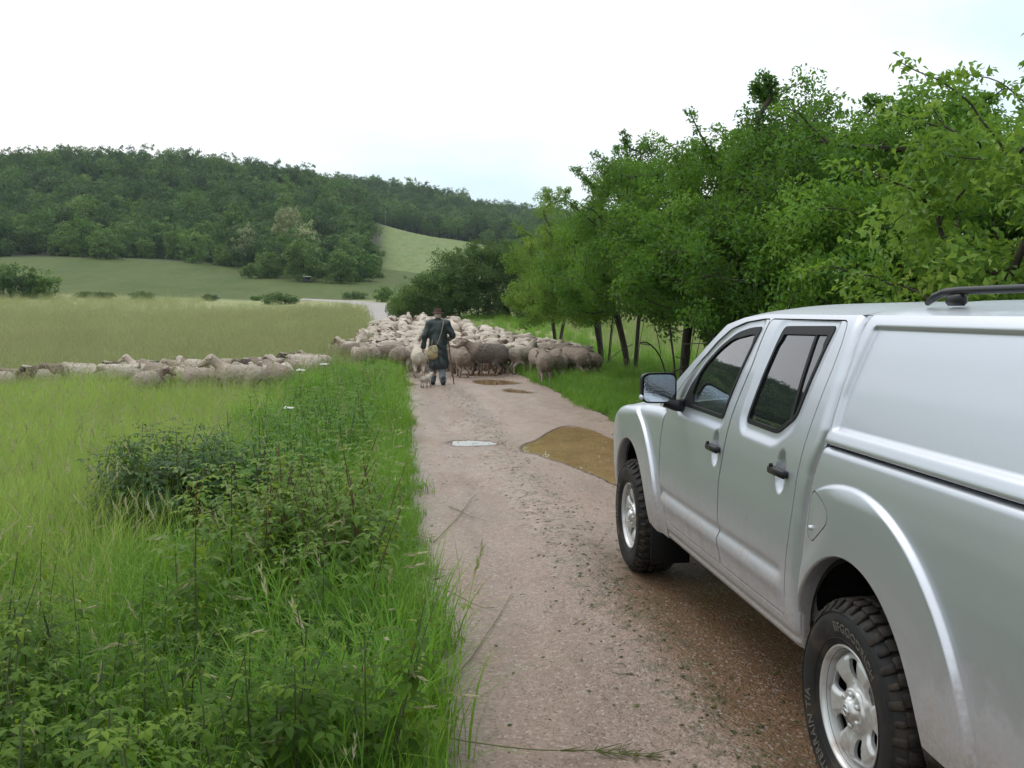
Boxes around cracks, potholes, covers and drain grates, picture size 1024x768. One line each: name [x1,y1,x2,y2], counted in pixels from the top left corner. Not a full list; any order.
pothole [446,439,501,447]
